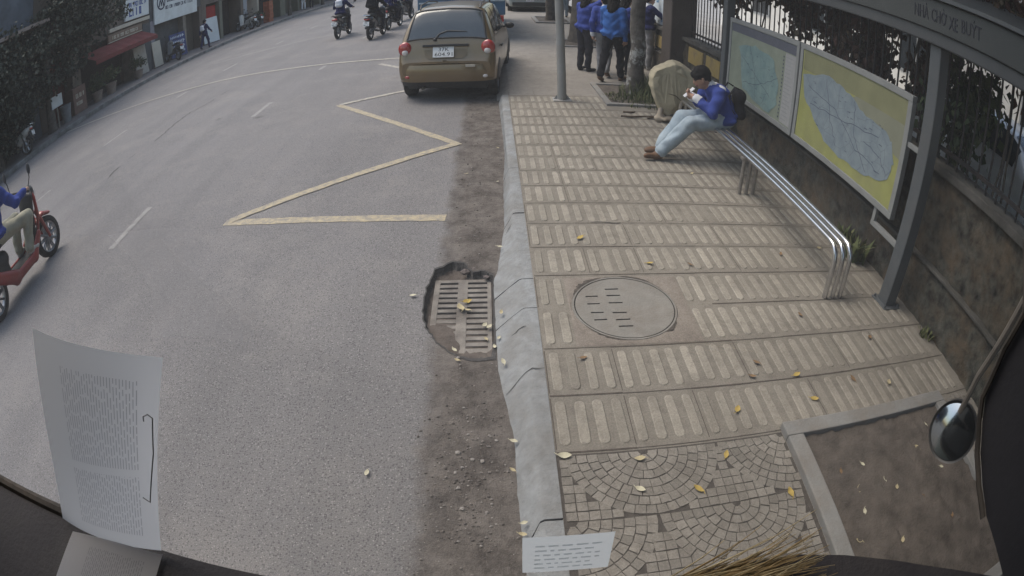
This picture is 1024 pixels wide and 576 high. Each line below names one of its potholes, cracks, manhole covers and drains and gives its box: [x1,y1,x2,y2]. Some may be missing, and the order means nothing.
manhole cover [571,276,678,340]
drain grate [430,279,493,354]
